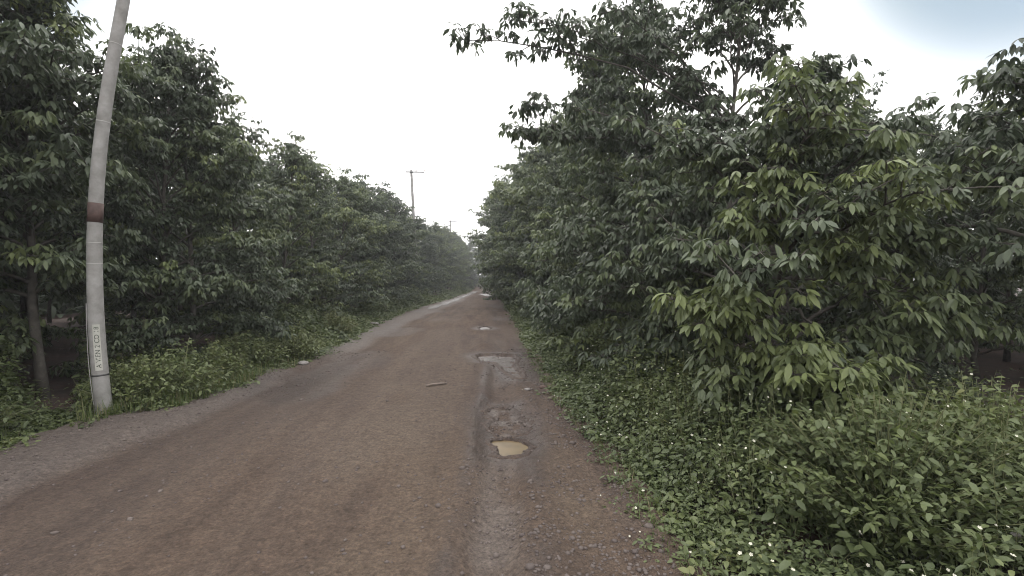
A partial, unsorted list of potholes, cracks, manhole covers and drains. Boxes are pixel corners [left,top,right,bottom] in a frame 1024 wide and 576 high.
pothole [485,437,537,459]
pothole [471,353,527,379]
pothole [480,404,534,438]
